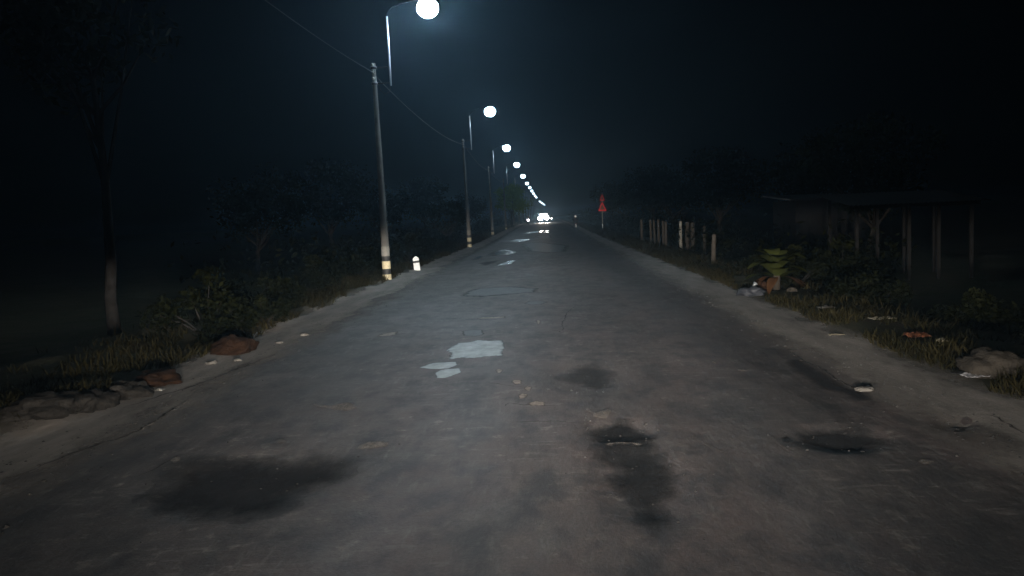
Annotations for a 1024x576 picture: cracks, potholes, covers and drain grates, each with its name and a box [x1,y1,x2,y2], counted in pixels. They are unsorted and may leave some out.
pothole [592,420,654,443]
pothole [799,430,882,451]
